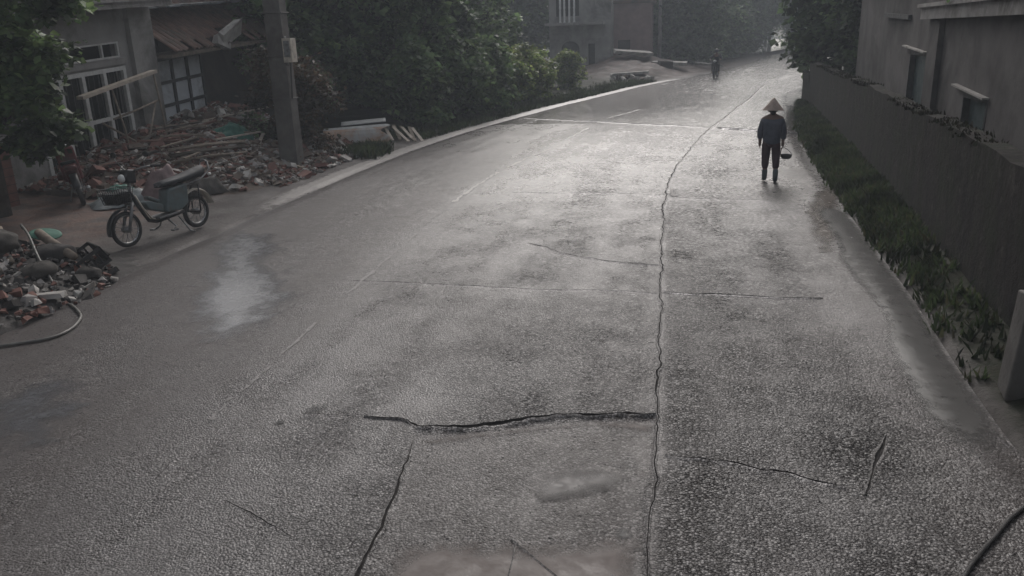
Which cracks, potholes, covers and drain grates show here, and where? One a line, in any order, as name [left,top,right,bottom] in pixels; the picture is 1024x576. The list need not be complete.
crack [863,434,888,496]
crack [665,454,846,489]
crack [303,412,656,576]
crack [527,243,660,266]
